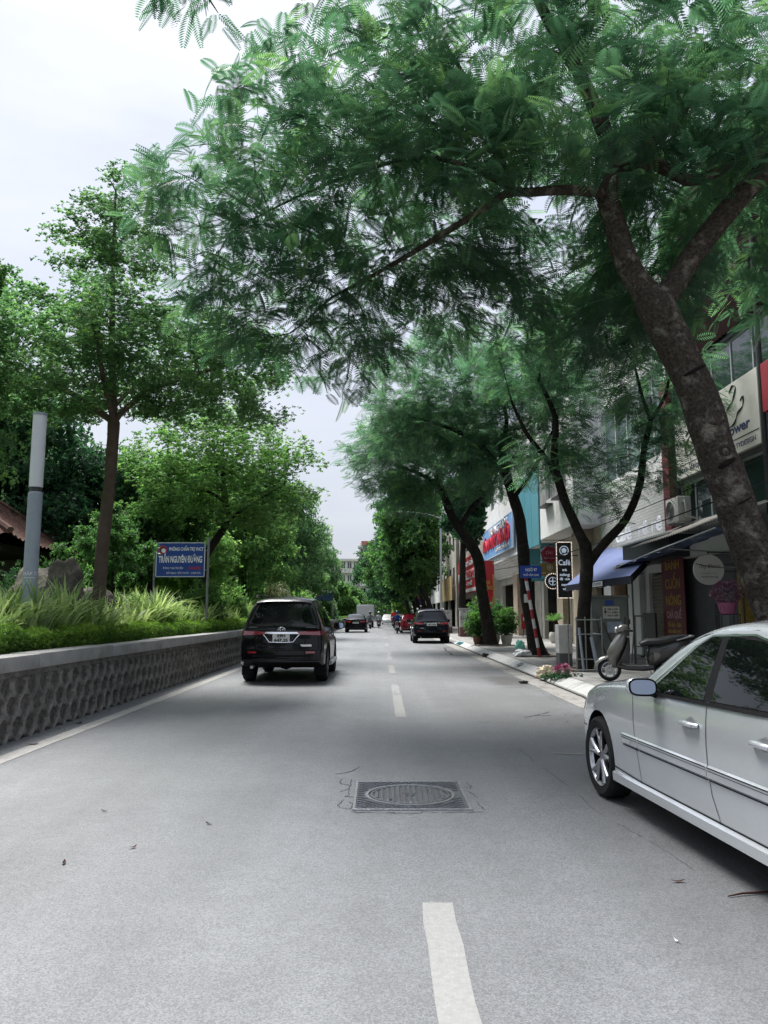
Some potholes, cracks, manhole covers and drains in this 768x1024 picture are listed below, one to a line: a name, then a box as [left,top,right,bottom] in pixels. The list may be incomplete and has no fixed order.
manhole cover [352,781,473,811]
crack [337,766,485,814]
